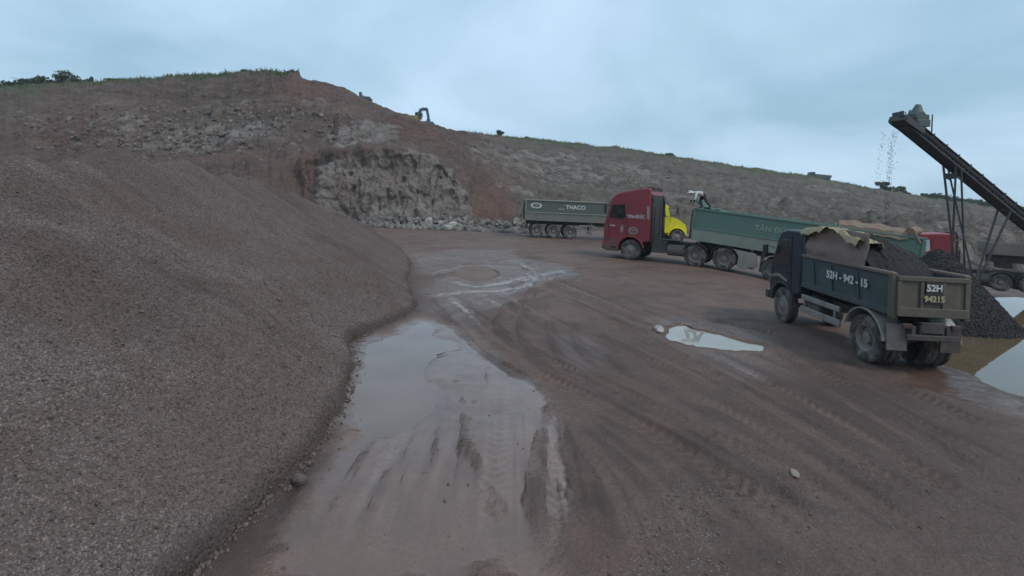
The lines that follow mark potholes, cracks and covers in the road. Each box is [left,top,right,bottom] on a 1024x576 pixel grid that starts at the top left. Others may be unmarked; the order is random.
pothole [659,323,771,353]
pothole [450,266,501,281]
